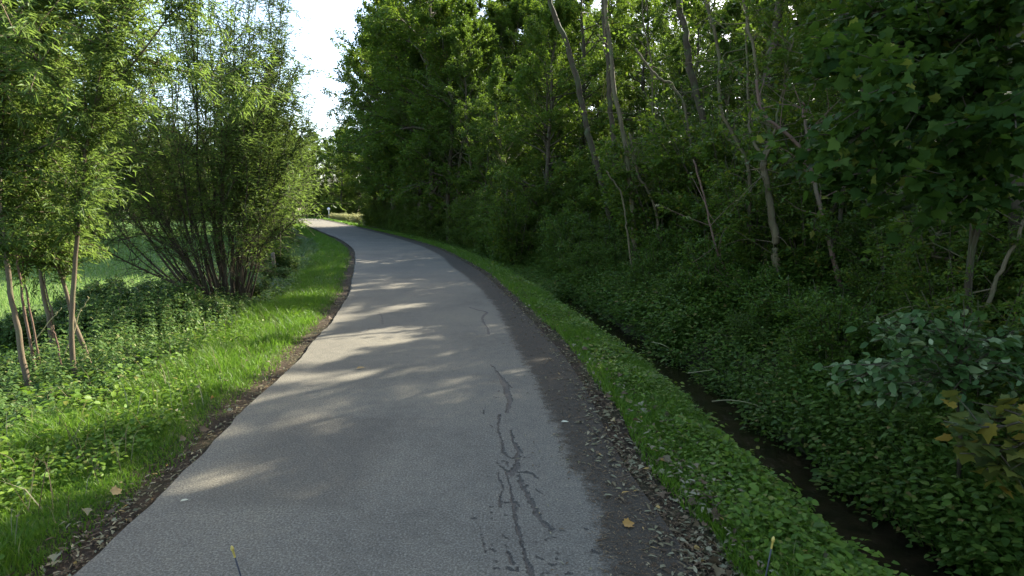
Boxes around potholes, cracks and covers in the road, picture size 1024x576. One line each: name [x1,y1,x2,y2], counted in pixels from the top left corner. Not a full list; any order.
crack [470,365,603,576]
crack [469,307,490,335]
